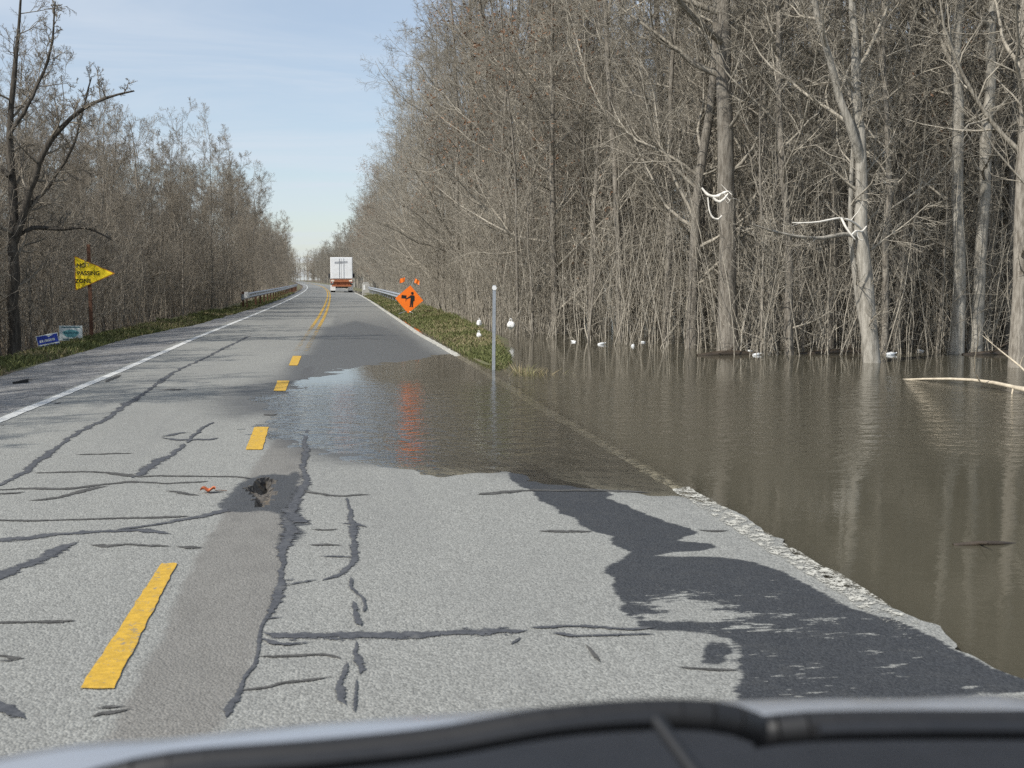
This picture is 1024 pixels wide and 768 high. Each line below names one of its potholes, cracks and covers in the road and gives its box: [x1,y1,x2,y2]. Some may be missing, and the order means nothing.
crack [285,491,370,625]
pothole [242,477,278,507]
crack [242,676,331,690]
crack [0,701,25,718]
crack [585,644,600,661]
crack [0,422,248,521]
